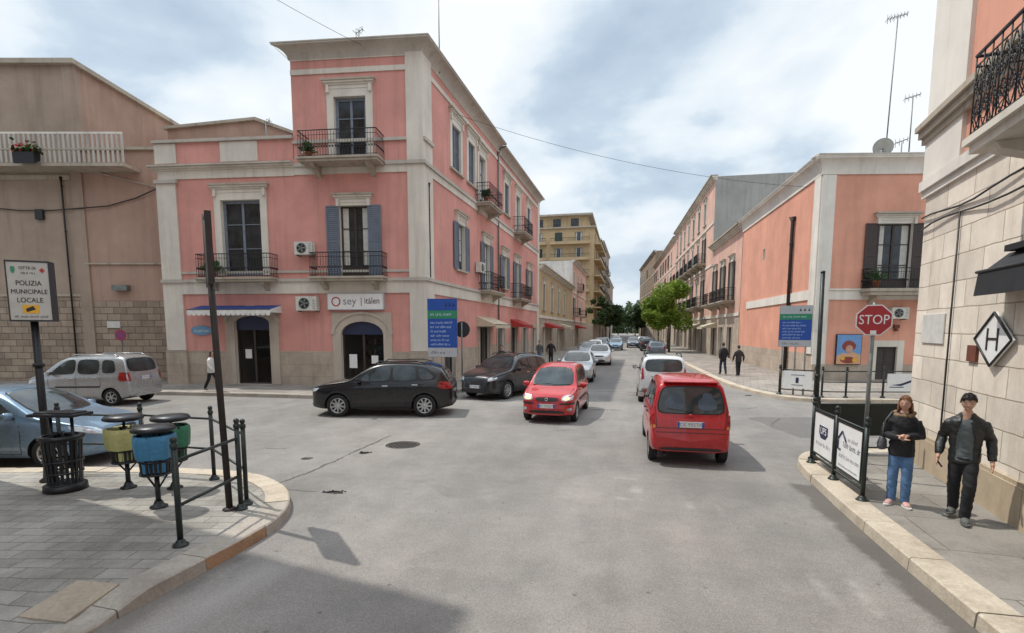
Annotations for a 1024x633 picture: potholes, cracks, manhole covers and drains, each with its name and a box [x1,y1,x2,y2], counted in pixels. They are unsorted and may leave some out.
manhole cover [384,441,422,449]
crack [268,435,391,492]
